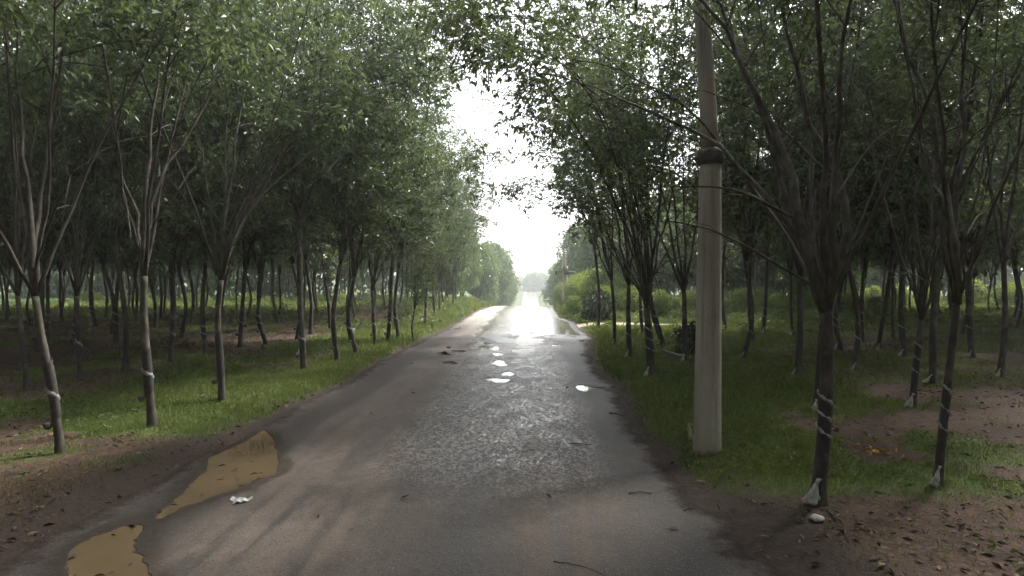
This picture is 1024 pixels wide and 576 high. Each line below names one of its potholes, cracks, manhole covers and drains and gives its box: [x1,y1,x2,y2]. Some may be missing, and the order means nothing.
pothole [155,430,280,520]
pothole [64,524,152,576]
